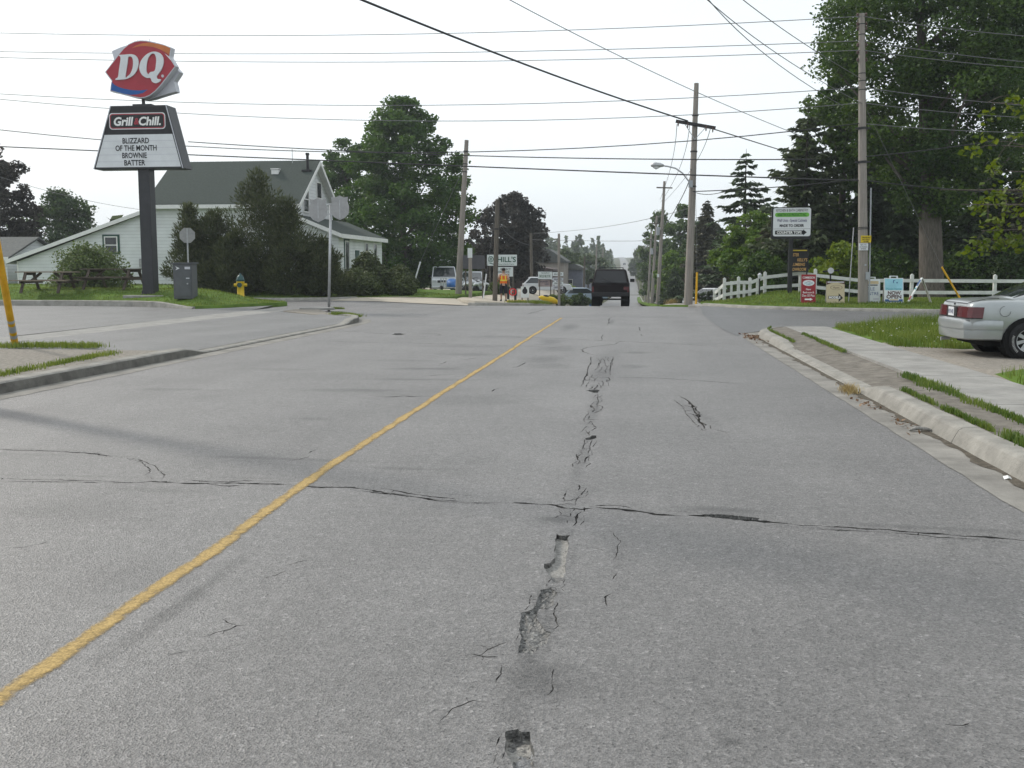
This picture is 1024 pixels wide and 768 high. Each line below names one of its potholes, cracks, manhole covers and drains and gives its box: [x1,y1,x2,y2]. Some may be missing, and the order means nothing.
crack [572,317,615,467]
pothole [517,588,557,655]
pothole [505,729,534,768]
crack [170,619,243,655]
pothole [544,534,570,583]
crack [468,579,566,681]
crack [1,449,1024,605]
crack [664,378,741,433]
